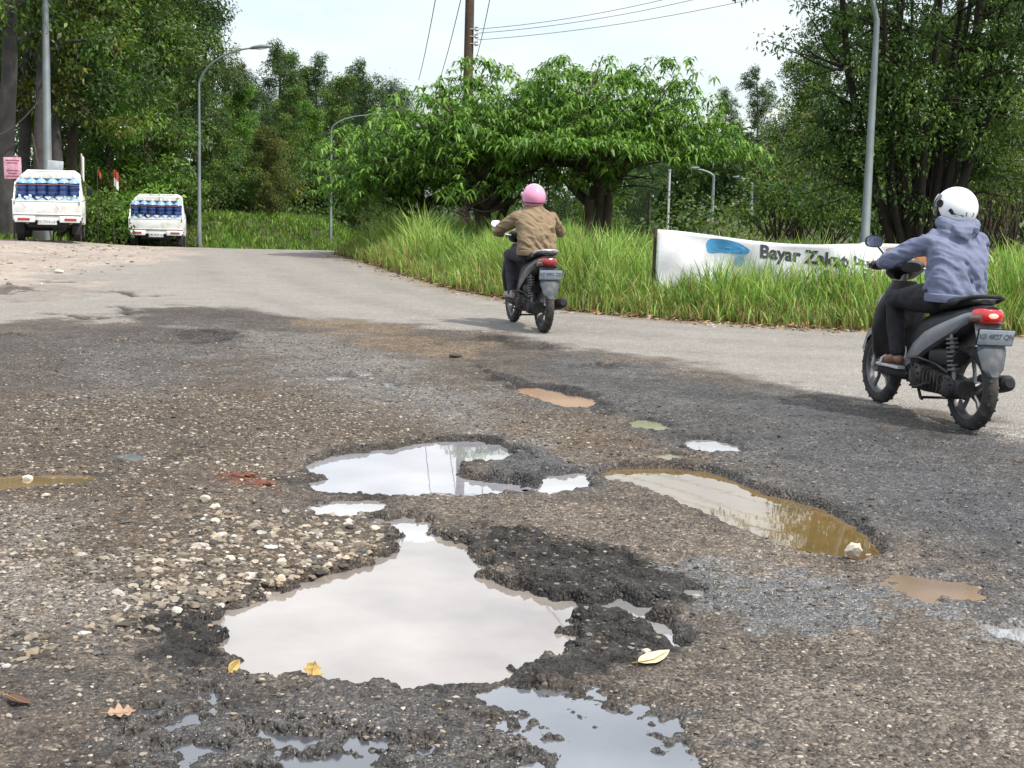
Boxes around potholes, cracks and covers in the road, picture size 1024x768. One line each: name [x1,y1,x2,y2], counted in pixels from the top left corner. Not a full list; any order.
pothole [420,663,770,768]
pothole [620,416,678,430]
pothole [673,433,756,452]
pothole [0,468,106,491]
pothole [509,381,606,408]
pothole [524,465,610,494]
pothole [181,530,595,692]
pothole [361,508,457,541]
pothole [856,563,1015,606]
pothole [594,460,899,560]
pothole [271,434,535,497]
